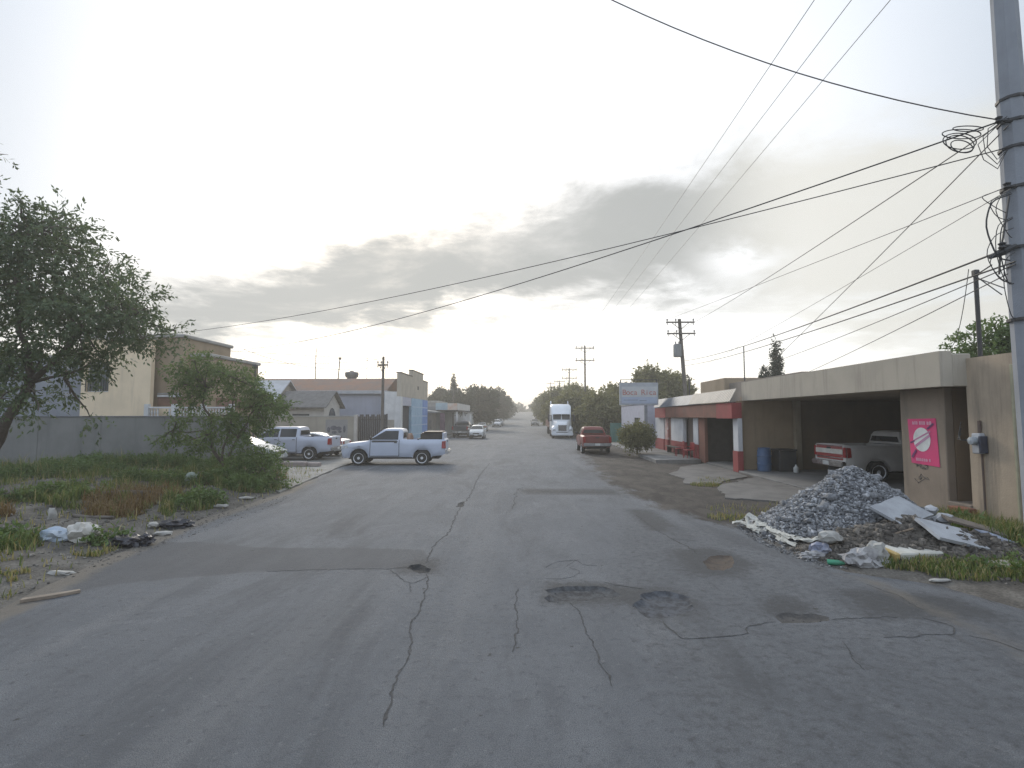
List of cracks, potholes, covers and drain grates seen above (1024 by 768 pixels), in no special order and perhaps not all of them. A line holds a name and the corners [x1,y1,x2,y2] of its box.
crack [572,605,612,686]
pothole [632,591,697,618]
pothole [703,555,734,571]
crack [663,621,768,639]
crack [383,463,490,727]
crack [832,584,1023,651]
pothole [544,586,621,603]
pothole [406,564,431,573]
pothole [775,613,829,623]
